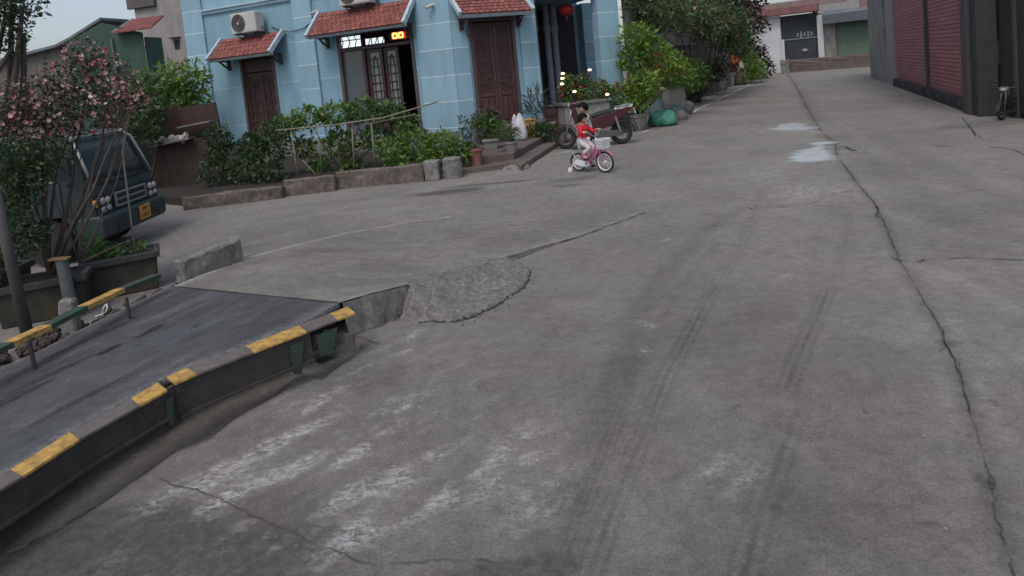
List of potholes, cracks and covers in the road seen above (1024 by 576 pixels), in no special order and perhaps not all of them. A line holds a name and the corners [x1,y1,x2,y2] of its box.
crack [4,335,501,576]
crack [748,75,1024,576]
